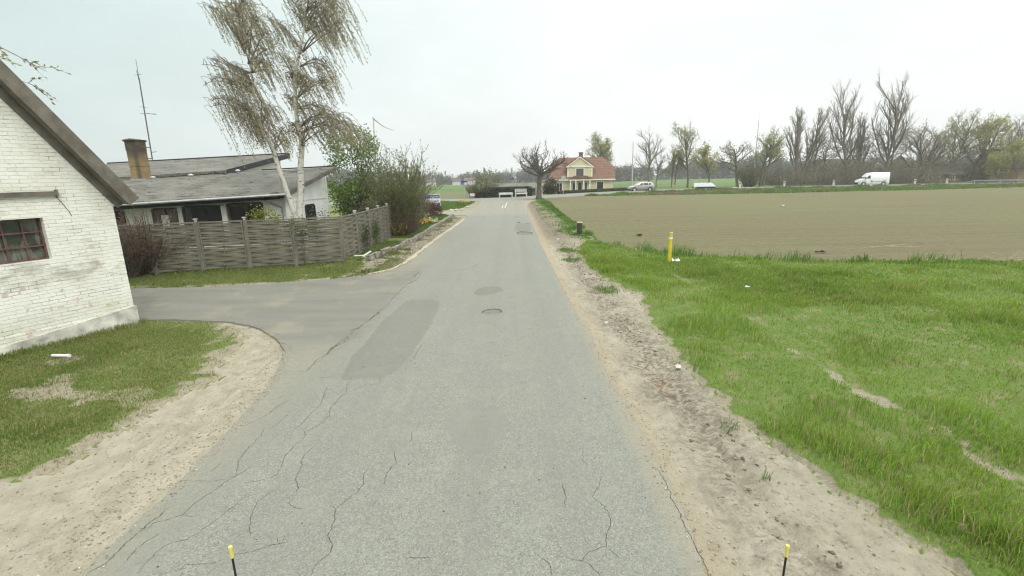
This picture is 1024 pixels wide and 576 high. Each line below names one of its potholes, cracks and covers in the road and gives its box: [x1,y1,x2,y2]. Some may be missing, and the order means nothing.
crack [657,468,709,575]
crack [537,454,618,575]
crack [88,366,381,573]
crack [312,433,412,573]
